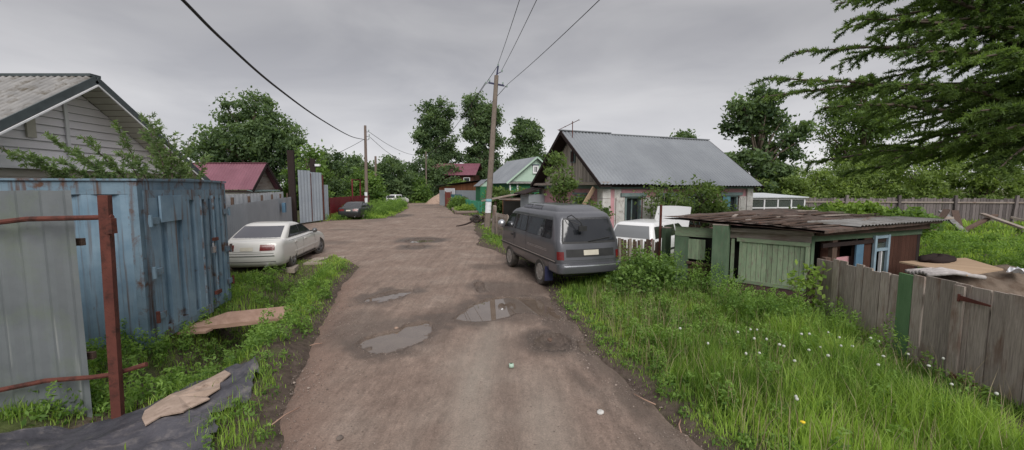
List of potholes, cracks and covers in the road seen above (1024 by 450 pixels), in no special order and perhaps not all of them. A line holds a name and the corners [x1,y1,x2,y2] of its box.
pothole [450,296,567,323]
pothole [534,332,573,351]
pothole [363,289,415,303]
pothole [352,320,435,355]
